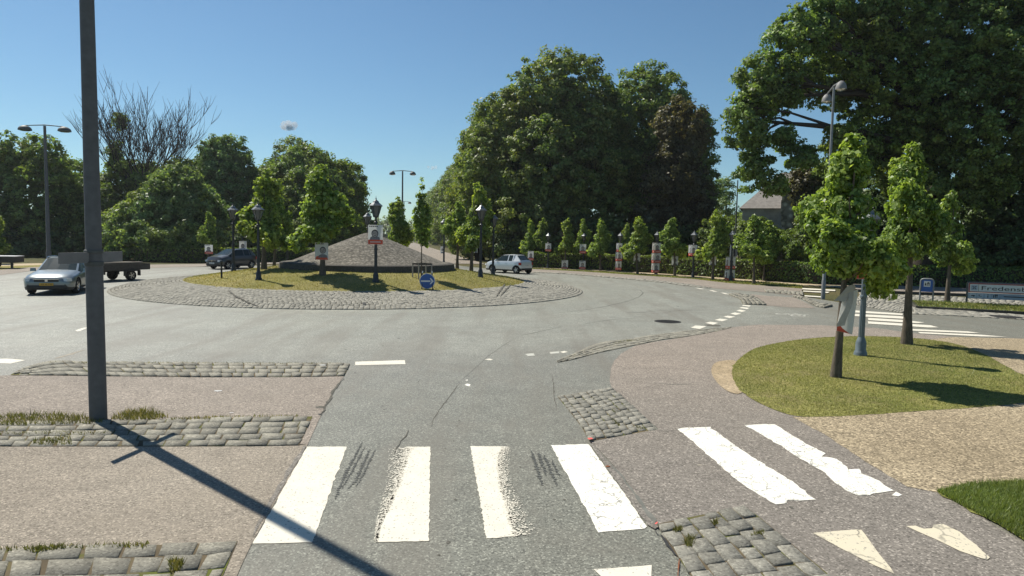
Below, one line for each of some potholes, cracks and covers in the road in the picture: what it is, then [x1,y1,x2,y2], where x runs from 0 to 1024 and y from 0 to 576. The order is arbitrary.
crack [321,380,342,413]
crack [432,289,682,424]
